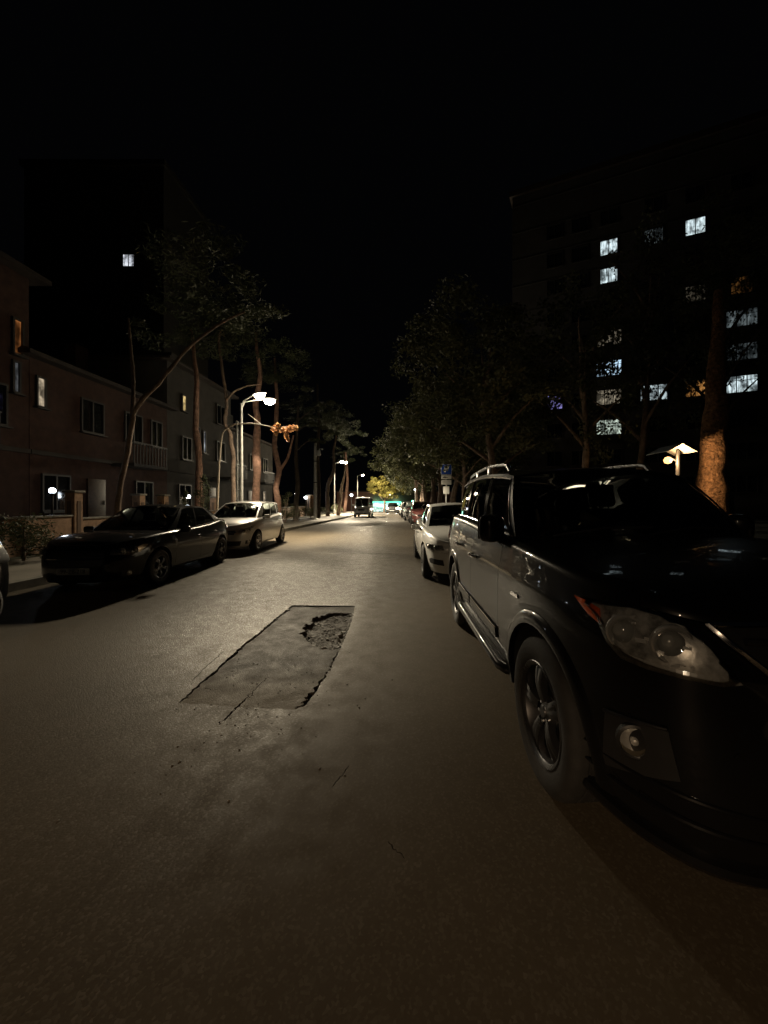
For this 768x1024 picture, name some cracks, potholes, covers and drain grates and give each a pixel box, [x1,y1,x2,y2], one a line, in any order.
pothole [298,612,354,650]
crack [179,606,292,725]
